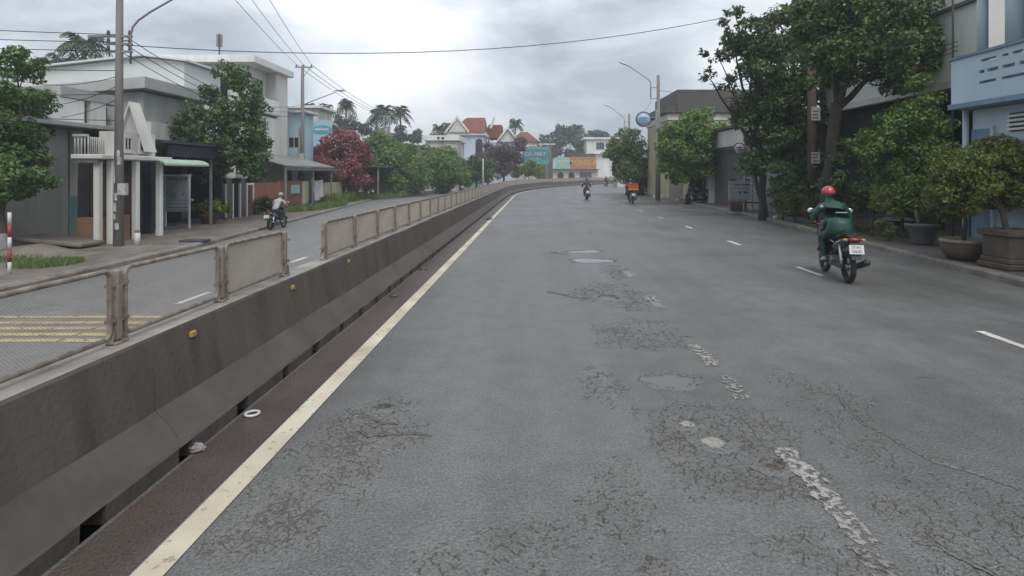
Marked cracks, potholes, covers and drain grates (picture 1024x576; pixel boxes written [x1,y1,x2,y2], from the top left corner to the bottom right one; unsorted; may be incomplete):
pothole [630,370,704,392]
crack [152,264,1024,576]
